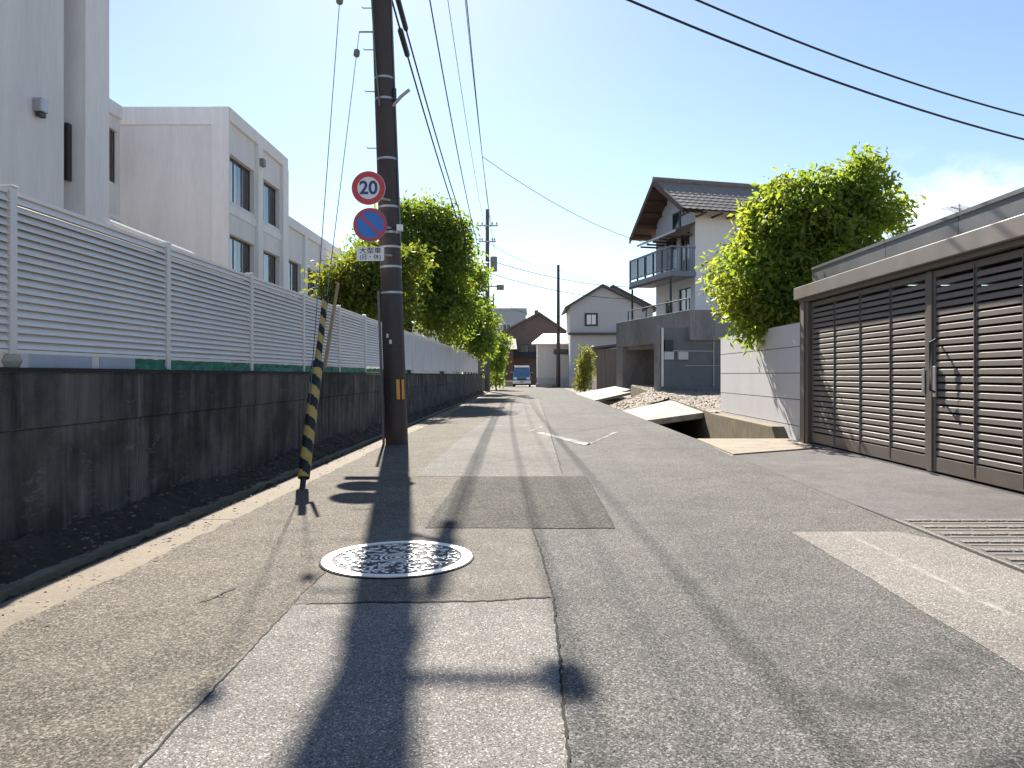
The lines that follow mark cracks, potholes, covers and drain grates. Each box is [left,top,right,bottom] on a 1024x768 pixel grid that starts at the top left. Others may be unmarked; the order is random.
manhole cover [319,541,474,579]
